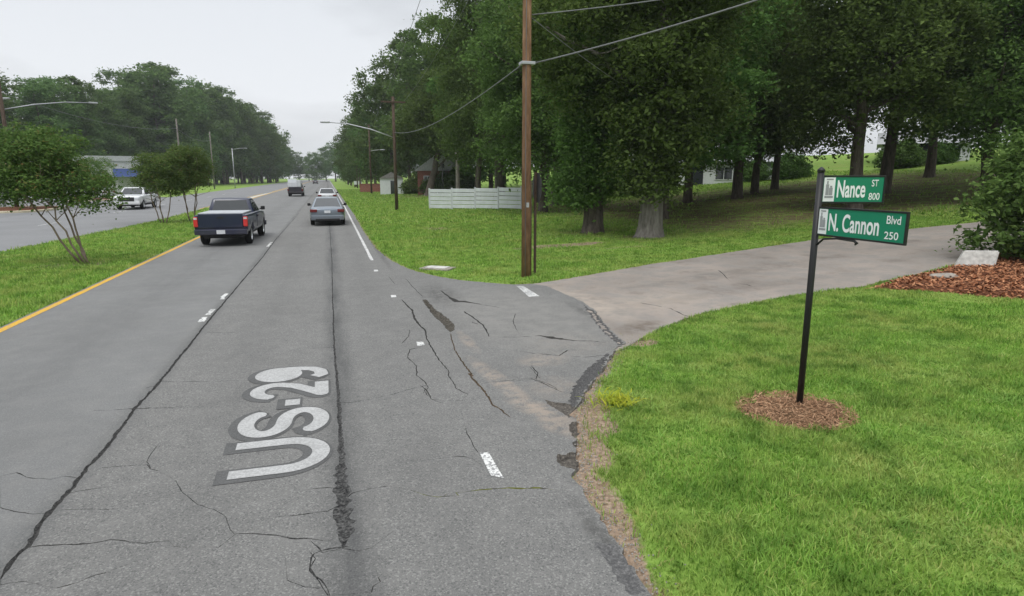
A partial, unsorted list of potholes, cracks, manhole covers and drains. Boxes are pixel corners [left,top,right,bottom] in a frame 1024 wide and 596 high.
crack [389,277,602,459]
crack [411,487,552,497]
